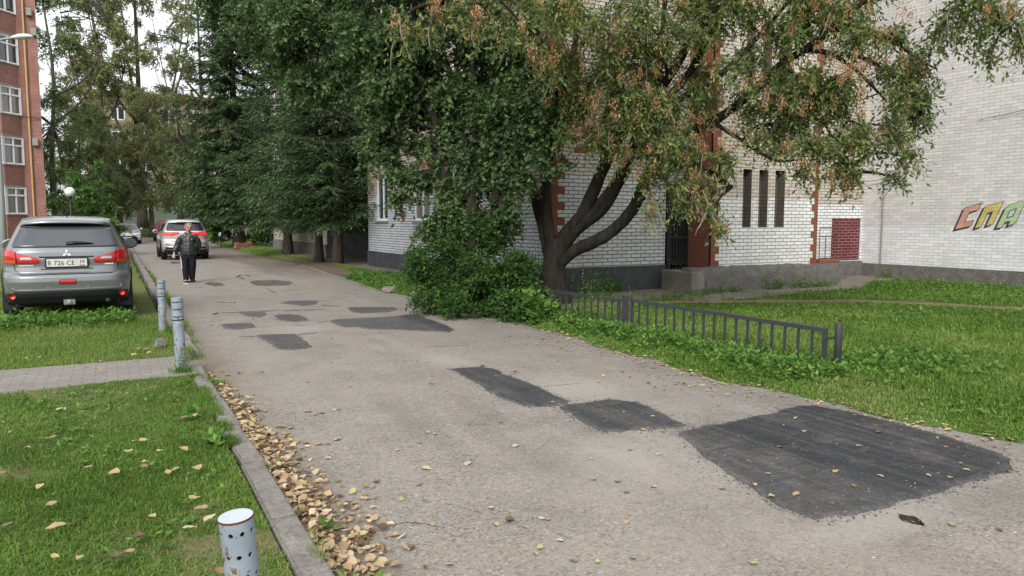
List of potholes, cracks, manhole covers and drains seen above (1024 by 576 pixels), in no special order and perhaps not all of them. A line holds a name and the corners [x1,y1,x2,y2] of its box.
pothole [897,513,924,526]
